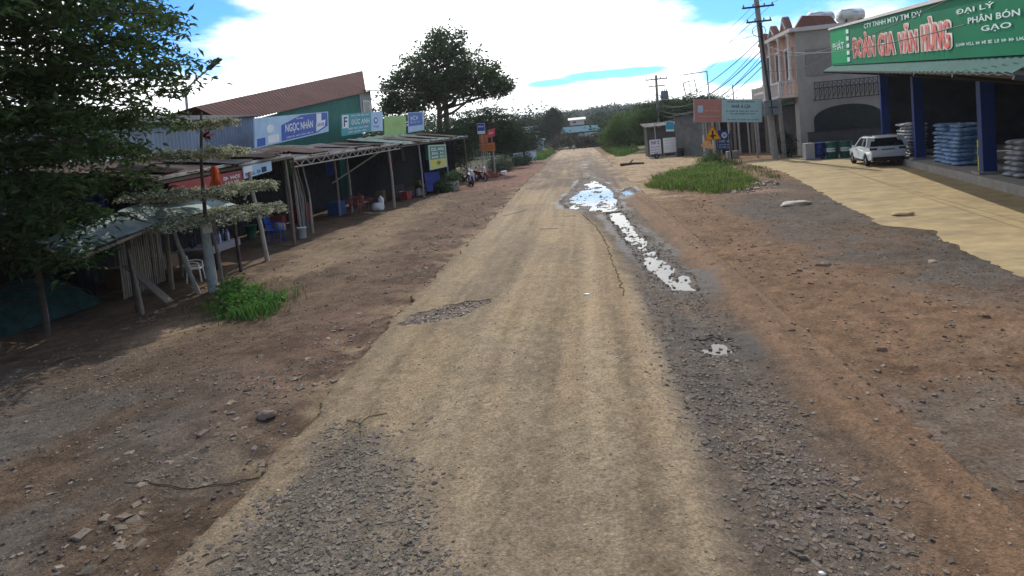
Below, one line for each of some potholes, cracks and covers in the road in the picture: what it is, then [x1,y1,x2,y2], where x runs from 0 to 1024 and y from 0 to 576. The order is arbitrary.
pothole [559,177,624,213]
pothole [397,300,491,326]
crack [582,214,624,296]
pothole [604,211,701,293]
pothole [694,338,736,357]
